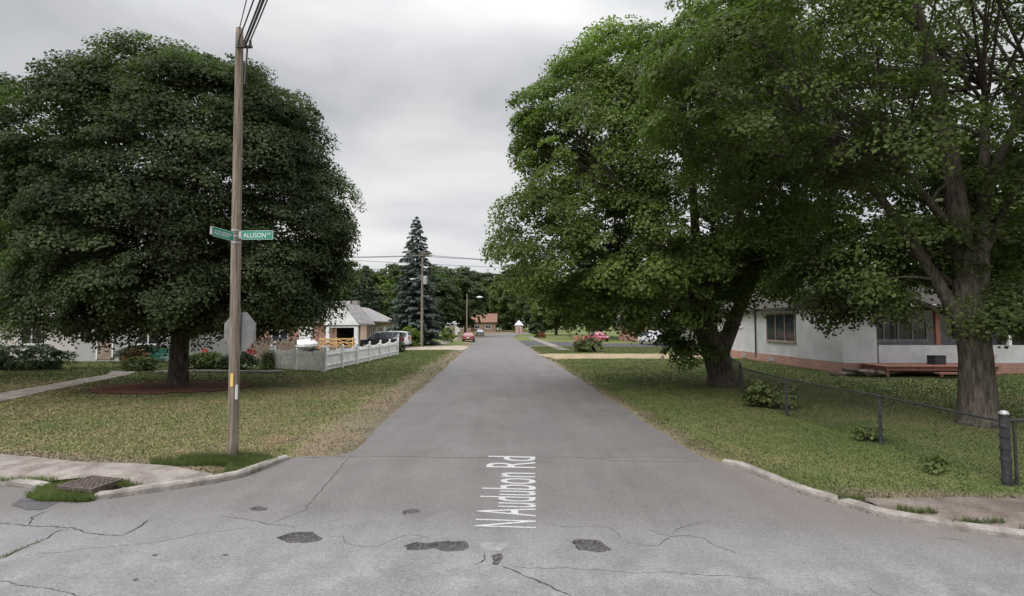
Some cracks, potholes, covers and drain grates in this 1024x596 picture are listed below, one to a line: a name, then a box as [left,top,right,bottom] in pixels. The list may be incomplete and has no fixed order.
crack [646,522,746,557]
crack [475,554,768,596]
crack [0,459,347,559]
drain grate [56,475,124,495]
crack [2,581,77,596]
